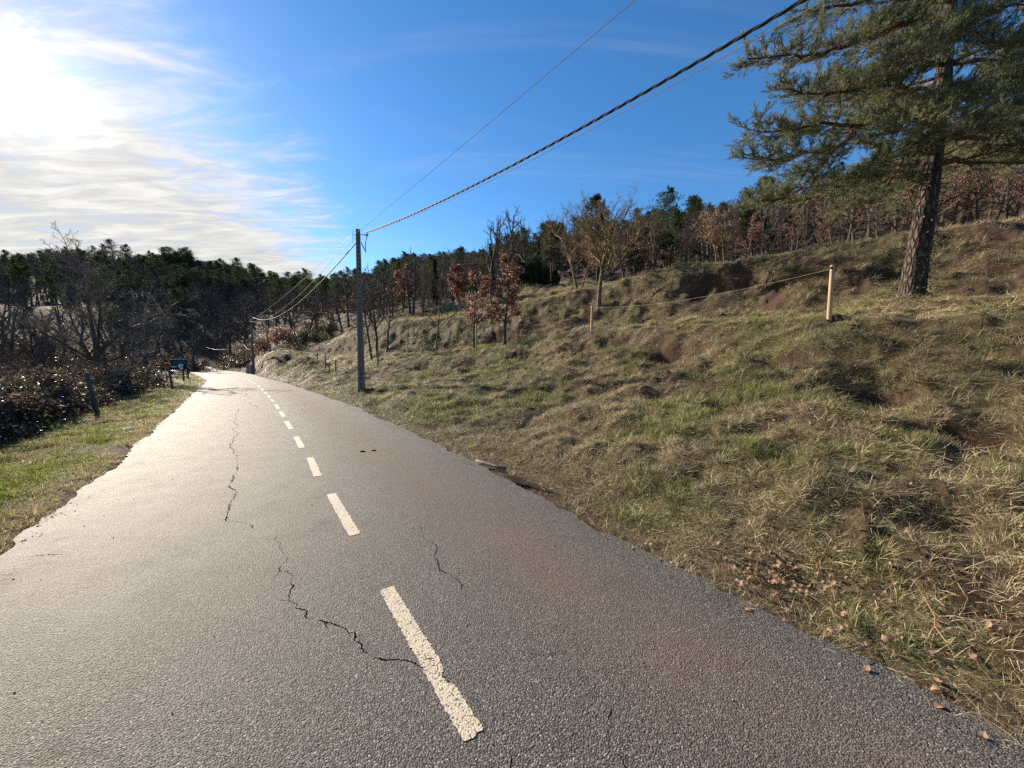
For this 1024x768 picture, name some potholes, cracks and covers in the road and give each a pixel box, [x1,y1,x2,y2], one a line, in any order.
crack [273,533,450,683]
crack [421,529,482,615]
crack [224,393,259,529]
